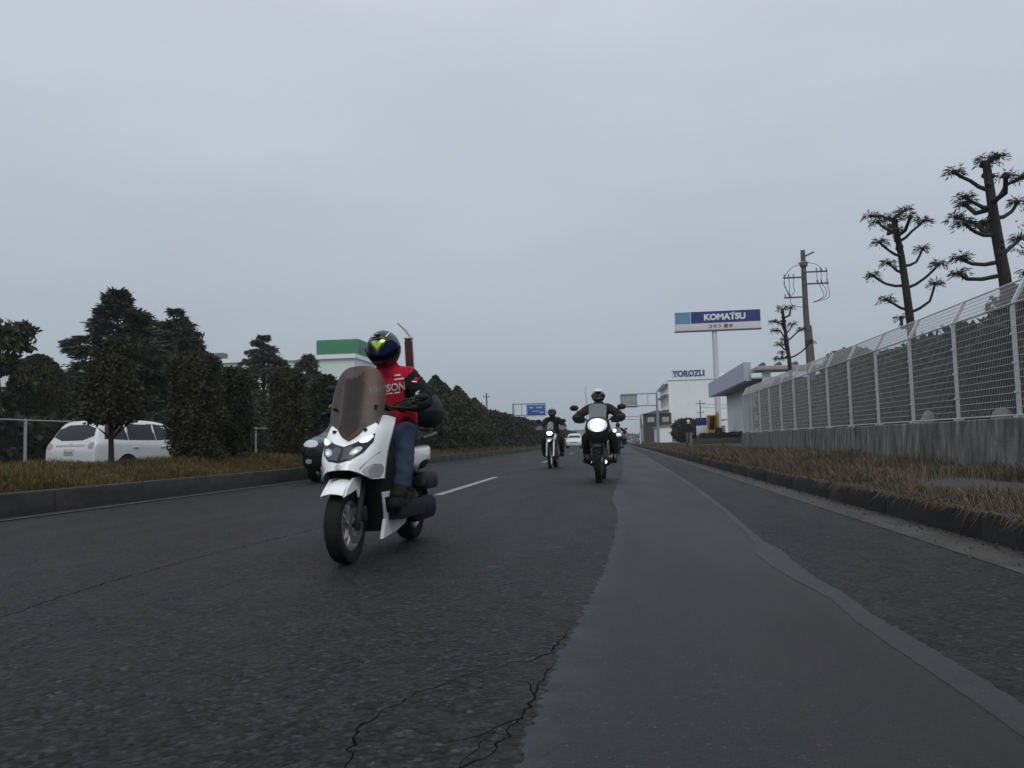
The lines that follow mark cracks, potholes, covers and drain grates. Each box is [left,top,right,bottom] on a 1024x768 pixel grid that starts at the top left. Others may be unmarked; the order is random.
crack [0,526,324,618]
crack [343,627,570,768]
